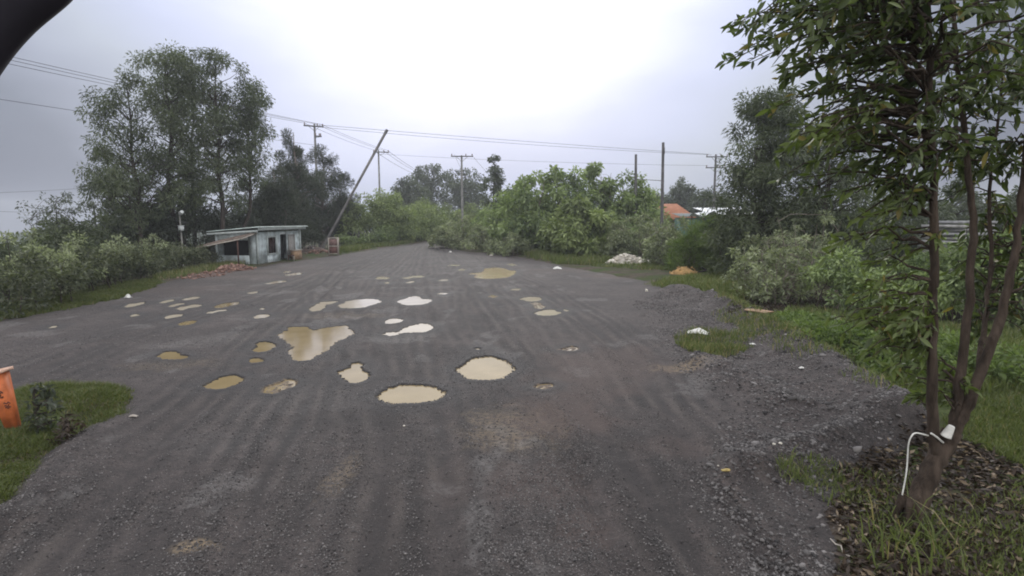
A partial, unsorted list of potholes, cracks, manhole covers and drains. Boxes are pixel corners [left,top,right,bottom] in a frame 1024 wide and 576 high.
pothole [375,322,439,337]
pothole [391,295,440,306]
pothole [527,380,562,392]
pothole [365,381,456,407]
pothole [528,308,568,317]
pothole [253,376,307,397]
pothole [147,349,197,361]
pothole [447,354,525,383]
pothole [328,360,380,386]
pothole [244,340,283,354]
pothole [461,267,522,280]
pothole [271,324,361,363]
